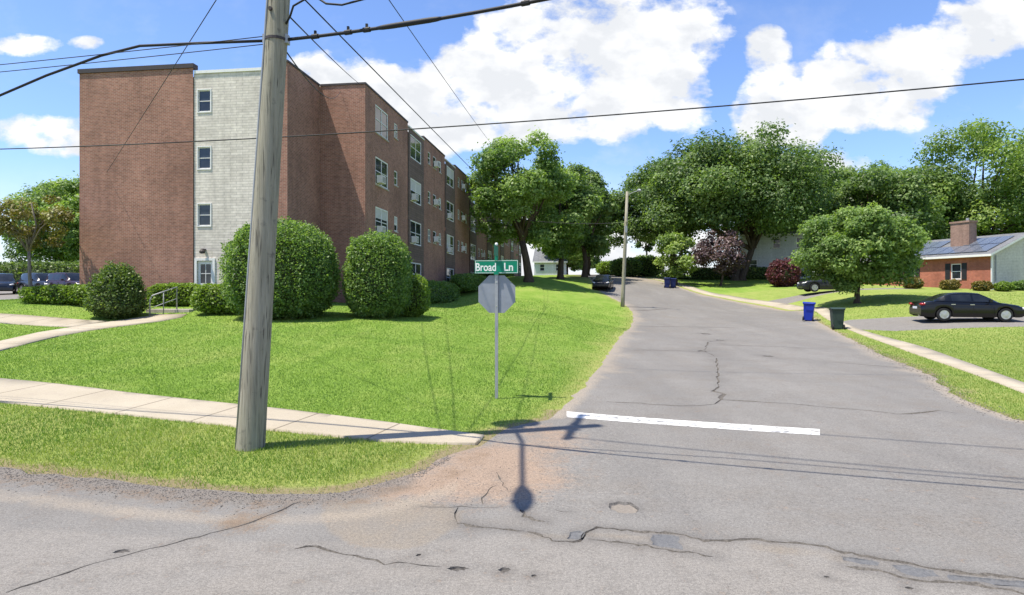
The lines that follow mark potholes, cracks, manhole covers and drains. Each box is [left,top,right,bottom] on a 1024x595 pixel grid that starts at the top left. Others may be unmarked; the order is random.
crack [421,472,508,521]
crack [618,341,952,414]
pothole [609,501,639,513]
crack [296,545,439,567]
